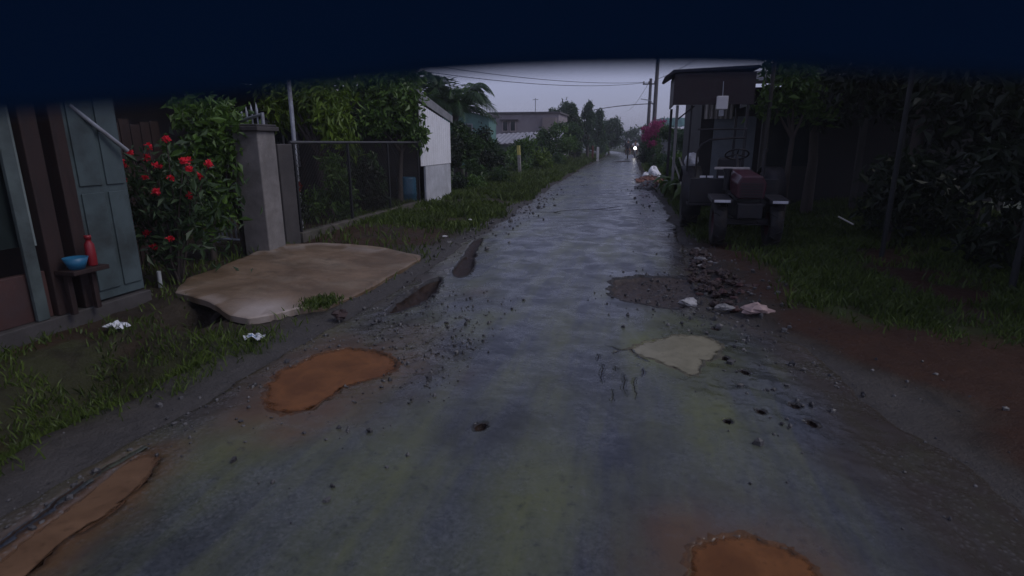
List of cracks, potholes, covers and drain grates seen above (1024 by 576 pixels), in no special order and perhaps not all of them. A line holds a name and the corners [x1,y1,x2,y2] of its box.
pothole [803,417,822,429]
pothole [452,238,483,278]
pothole [385,277,443,314]
pothole [606,274,703,310]
crack [595,345,650,402]
pothole [471,420,490,431]
